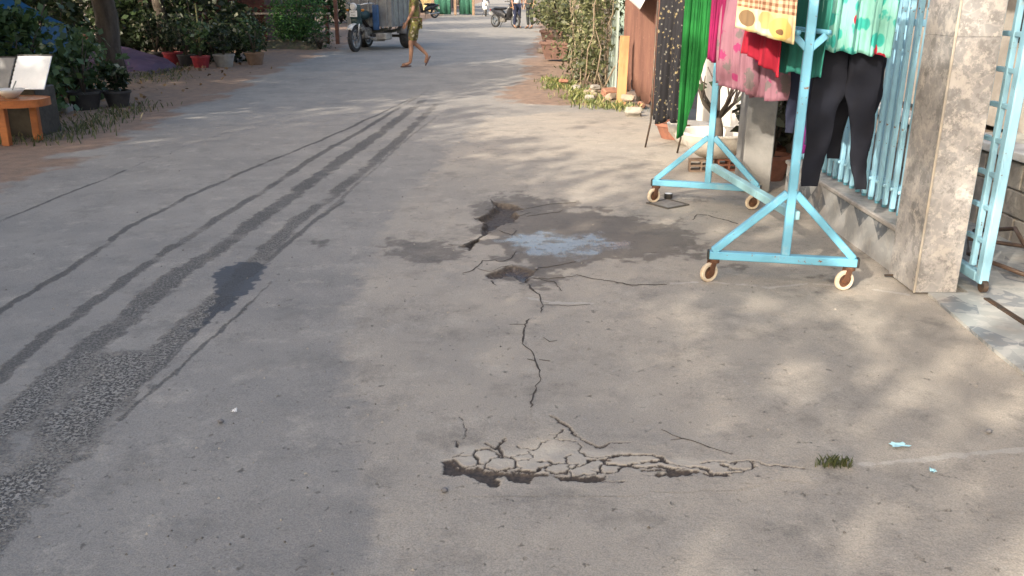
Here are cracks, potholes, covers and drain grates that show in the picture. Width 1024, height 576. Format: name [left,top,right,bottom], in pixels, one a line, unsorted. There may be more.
crack [420,201,830,496]
pothole [454,198,528,253]
pothole [480,264,539,285]
